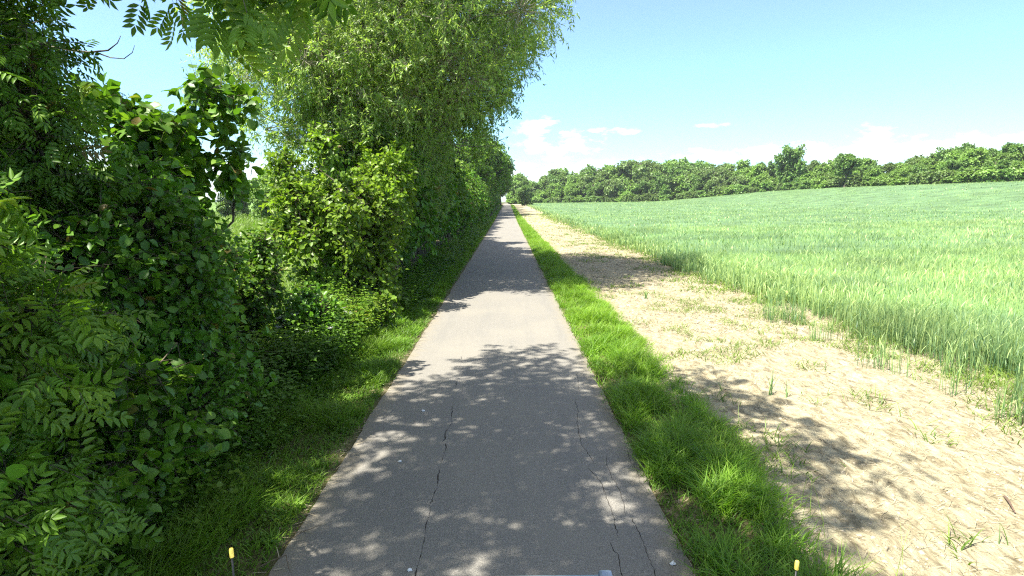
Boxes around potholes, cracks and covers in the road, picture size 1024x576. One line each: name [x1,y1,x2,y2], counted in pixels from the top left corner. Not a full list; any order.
crack [575,374,656,576]
crack [414,357,462,576]
